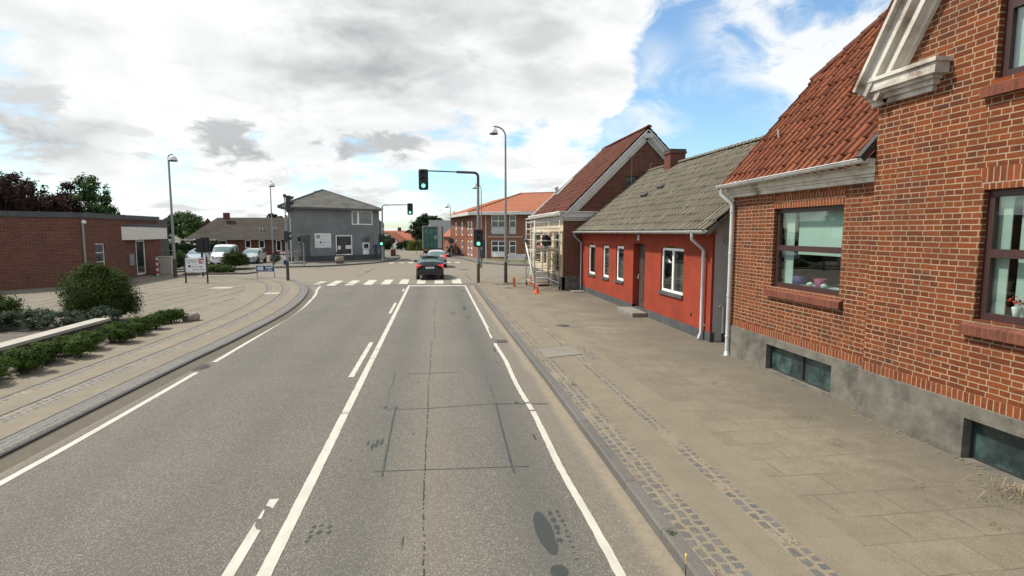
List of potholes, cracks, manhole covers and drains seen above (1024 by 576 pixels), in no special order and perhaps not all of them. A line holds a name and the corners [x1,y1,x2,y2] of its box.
utility cover [528,345,600,361]
